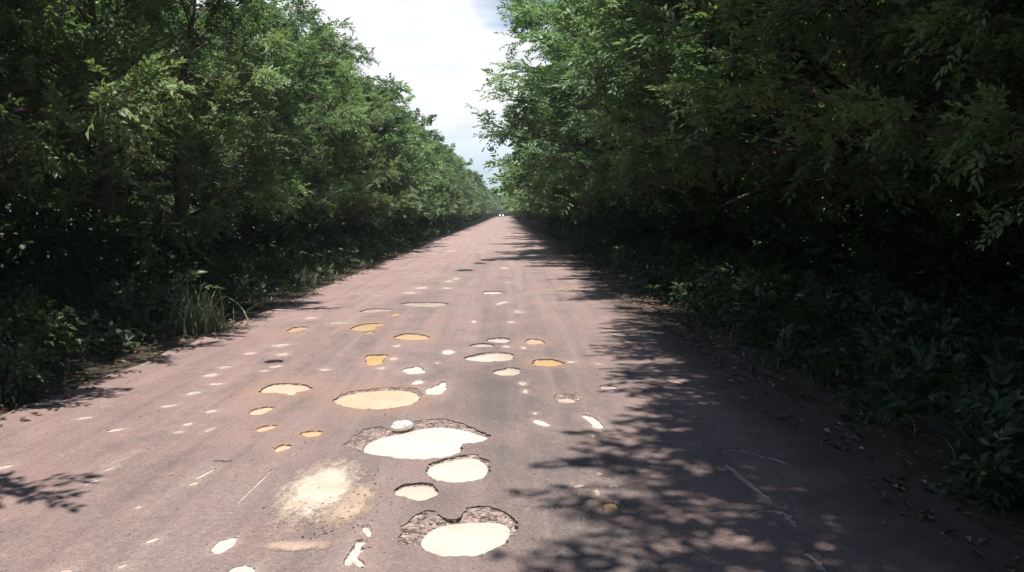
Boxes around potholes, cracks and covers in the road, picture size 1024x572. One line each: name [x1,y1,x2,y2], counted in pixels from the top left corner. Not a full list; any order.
pothole [351,323,385,331]
pothole [581,414,604,429]
pothole [365,354,388,365]
pothole [424,454,491,483]
pothole [332,387,423,409]
pothole [394,482,439,501]
pothole [553,393,584,404]
pothole [397,506,519,557]
pothole [493,367,521,376]
